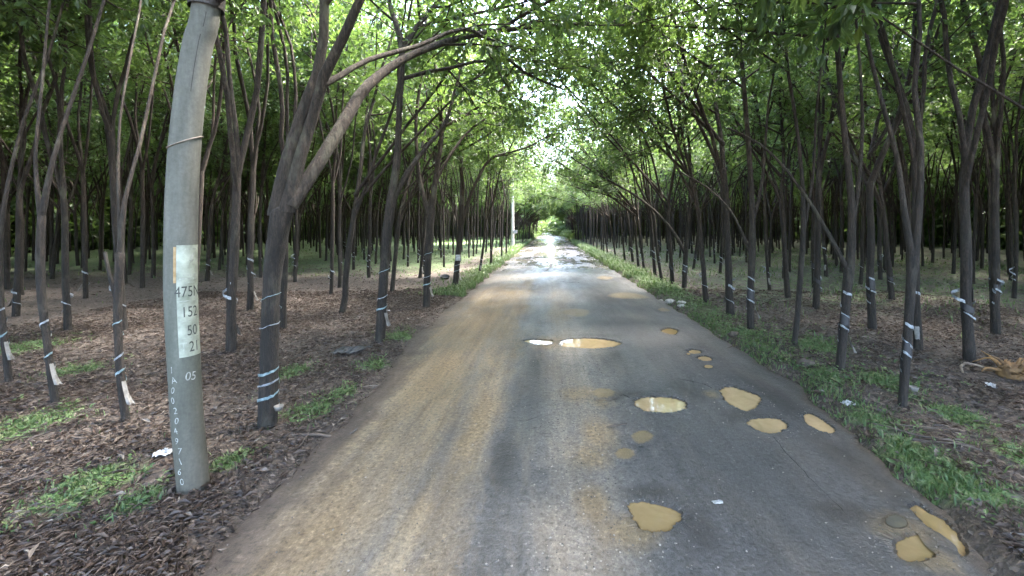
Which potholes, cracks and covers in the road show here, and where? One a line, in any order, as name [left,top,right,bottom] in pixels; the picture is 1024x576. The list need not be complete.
pothole [873,523,960,576]
pothole [709,383,771,414]
pothole [517,337,560,346]
pothole [792,409,848,439]
pothole [735,412,800,439]
pothole [624,392,697,417]
pothole [552,336,628,350]
pothole [655,326,684,336]
pothole [690,353,720,363]
pothole [890,494,990,570]
